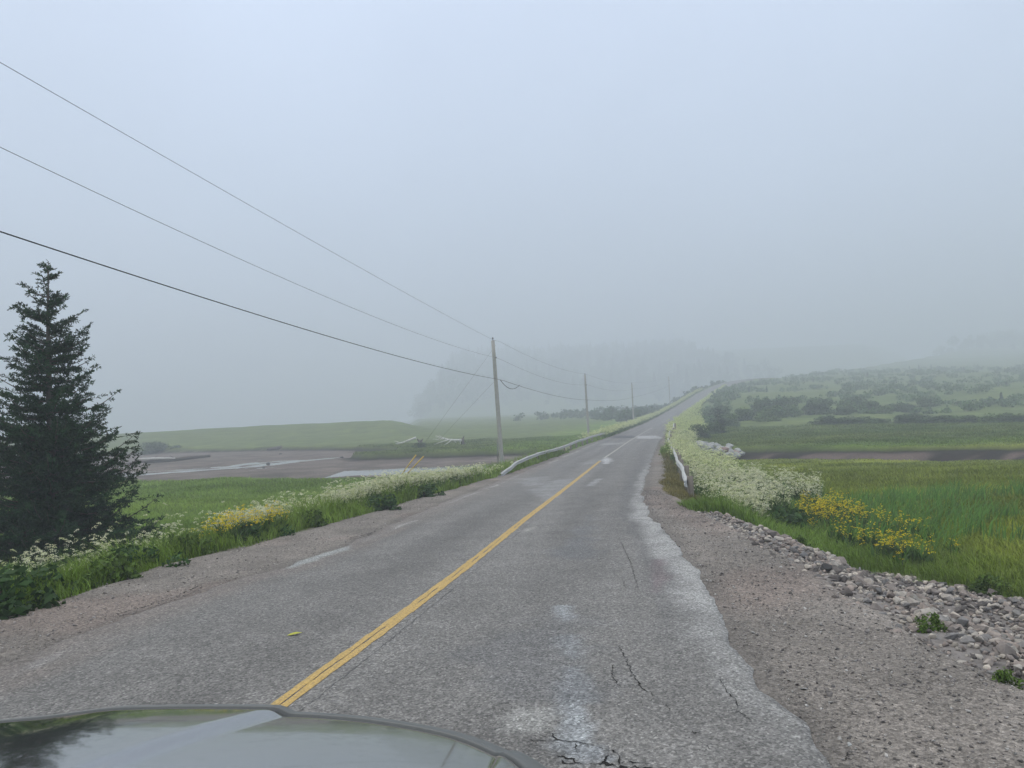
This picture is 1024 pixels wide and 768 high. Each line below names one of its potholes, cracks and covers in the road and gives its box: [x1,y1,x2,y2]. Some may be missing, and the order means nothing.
crack [531,732,652,768]
crack [611,646,671,712]
